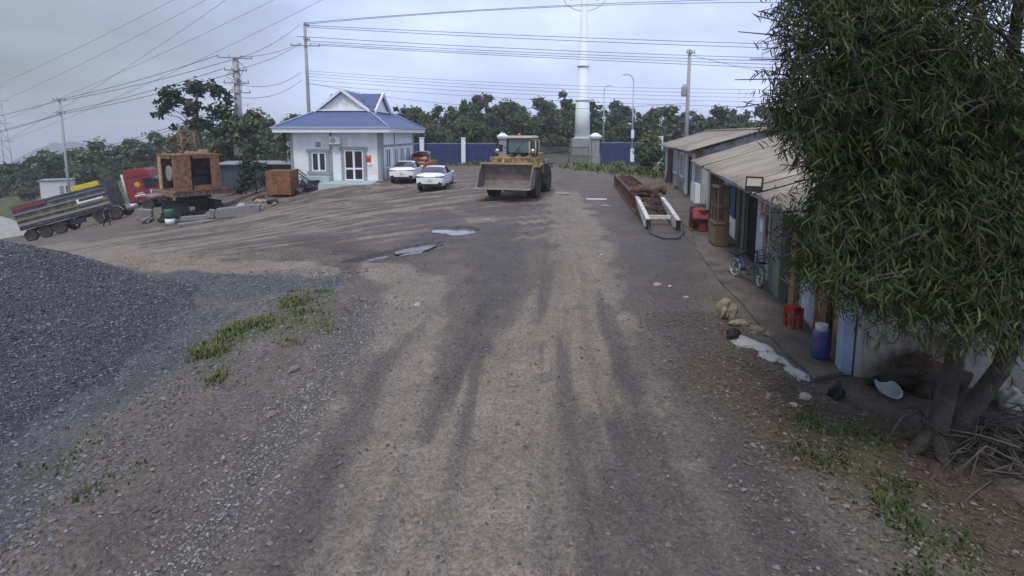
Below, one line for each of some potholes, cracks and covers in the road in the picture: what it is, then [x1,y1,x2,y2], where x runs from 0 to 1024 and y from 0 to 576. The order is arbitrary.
pothole [429,226,483,237]
pothole [331,240,450,267]
